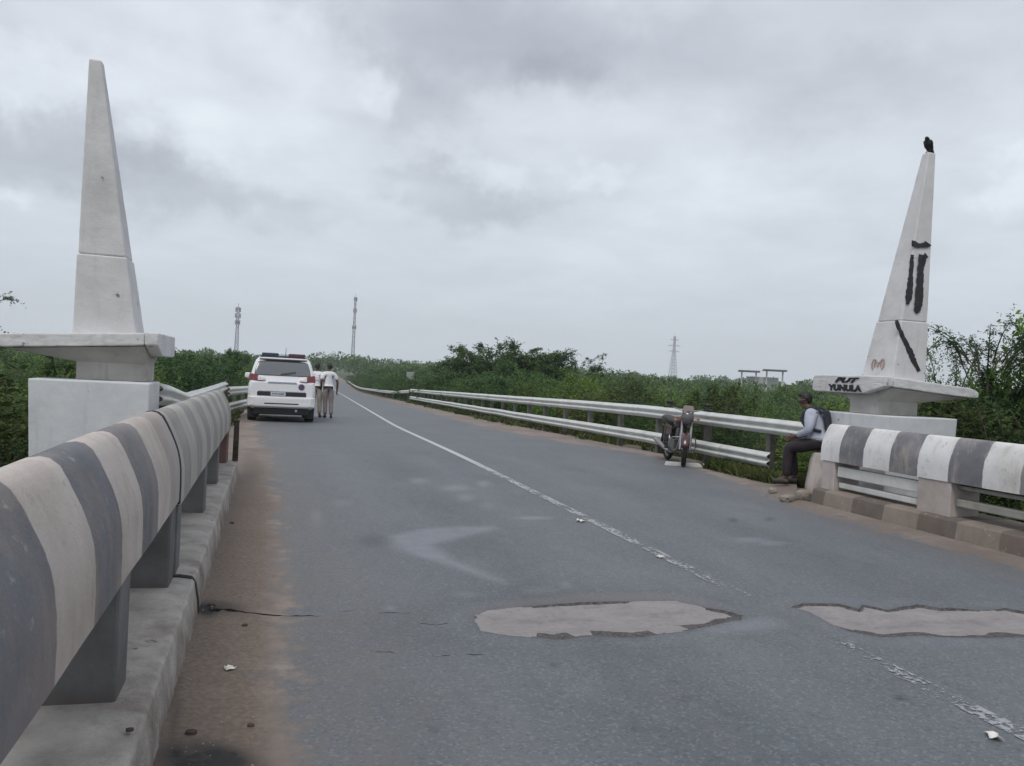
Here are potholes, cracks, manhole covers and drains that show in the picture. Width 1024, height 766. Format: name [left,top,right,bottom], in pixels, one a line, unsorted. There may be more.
crack [208,608,447,625]
